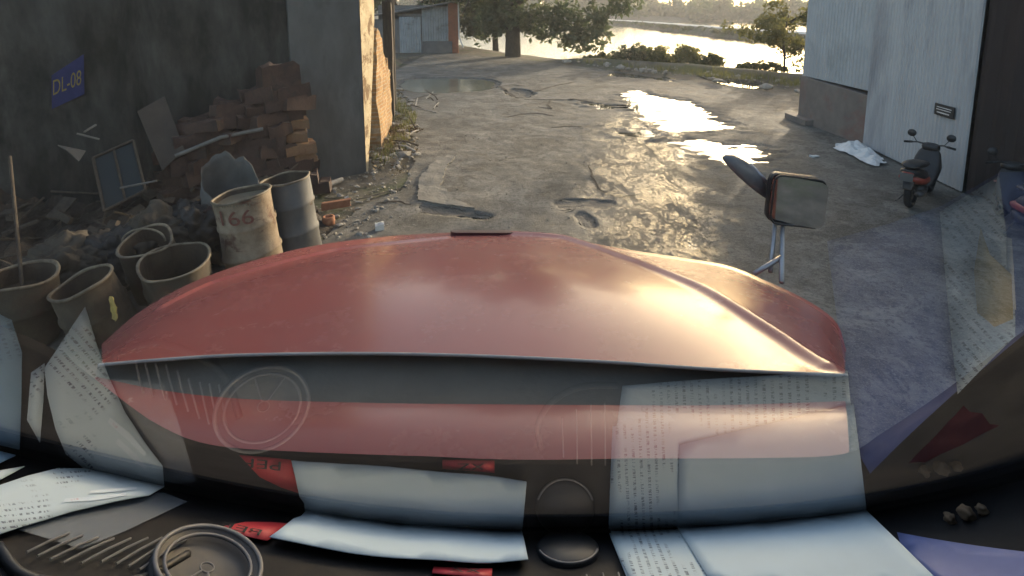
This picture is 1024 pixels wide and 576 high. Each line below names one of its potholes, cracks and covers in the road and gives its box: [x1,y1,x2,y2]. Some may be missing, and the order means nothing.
pothole [505,88,535,98]
crack [588,164,636,197]
pothole [554,198,616,210]
pothole [396,77,502,93]
pothole [419,205,493,220]
pothole [565,210,598,229]
